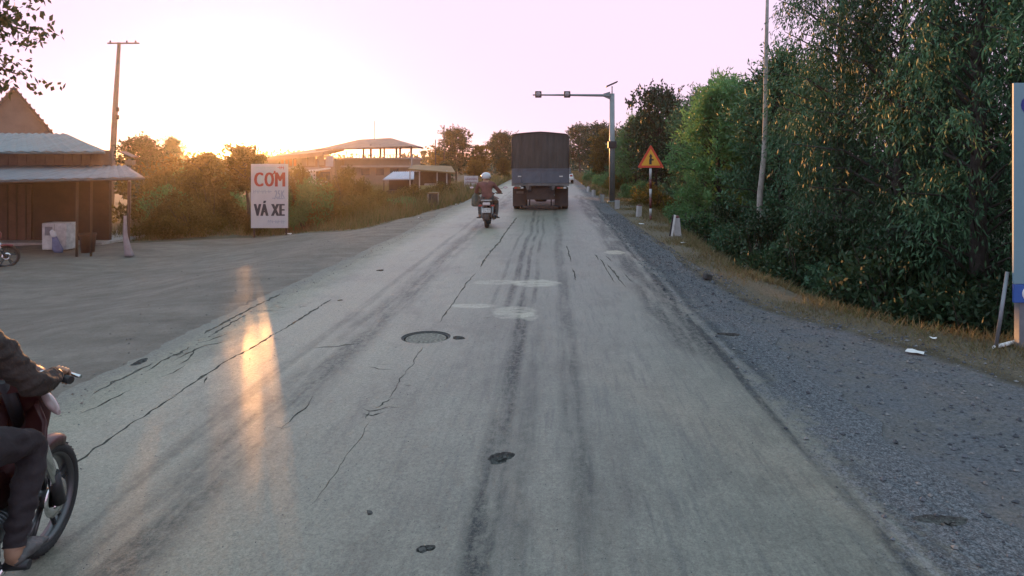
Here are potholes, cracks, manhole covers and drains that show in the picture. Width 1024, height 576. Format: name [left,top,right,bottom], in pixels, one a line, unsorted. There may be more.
pothole [912,514,968,527]
crack [313,348,423,503]
manhole cover [401,331,450,344]
pothole [416,545,436,553]
pothole [487,452,515,465]
crack [77,294,332,462]
crack [595,255,631,286]
